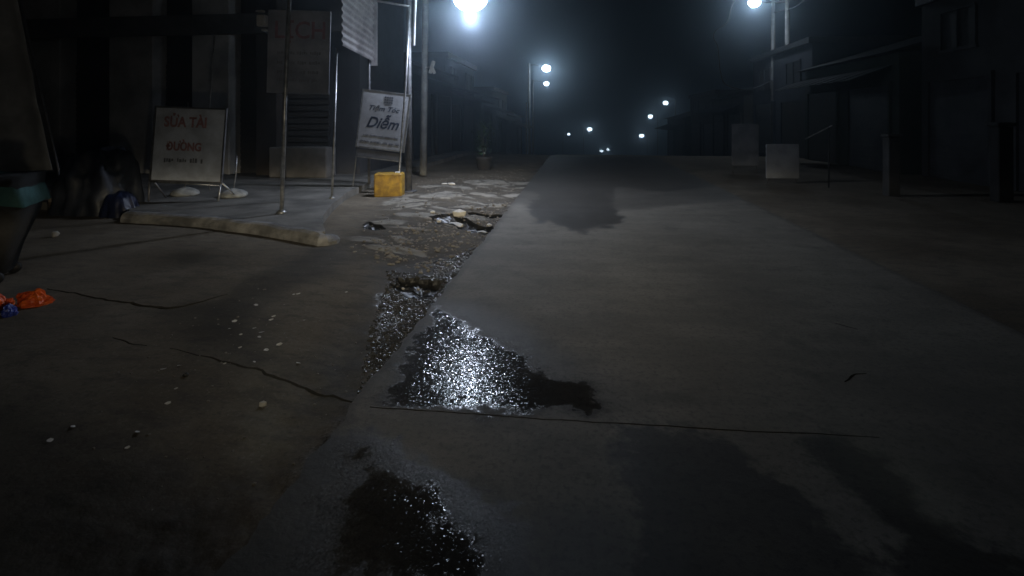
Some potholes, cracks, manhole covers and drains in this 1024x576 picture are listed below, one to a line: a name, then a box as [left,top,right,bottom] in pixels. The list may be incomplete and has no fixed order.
pothole [429,213,494,235]
pothole [389,277,444,298]
crack [170,348,353,403]
pothole [363,222,386,231]
crack [48,289,227,309]
